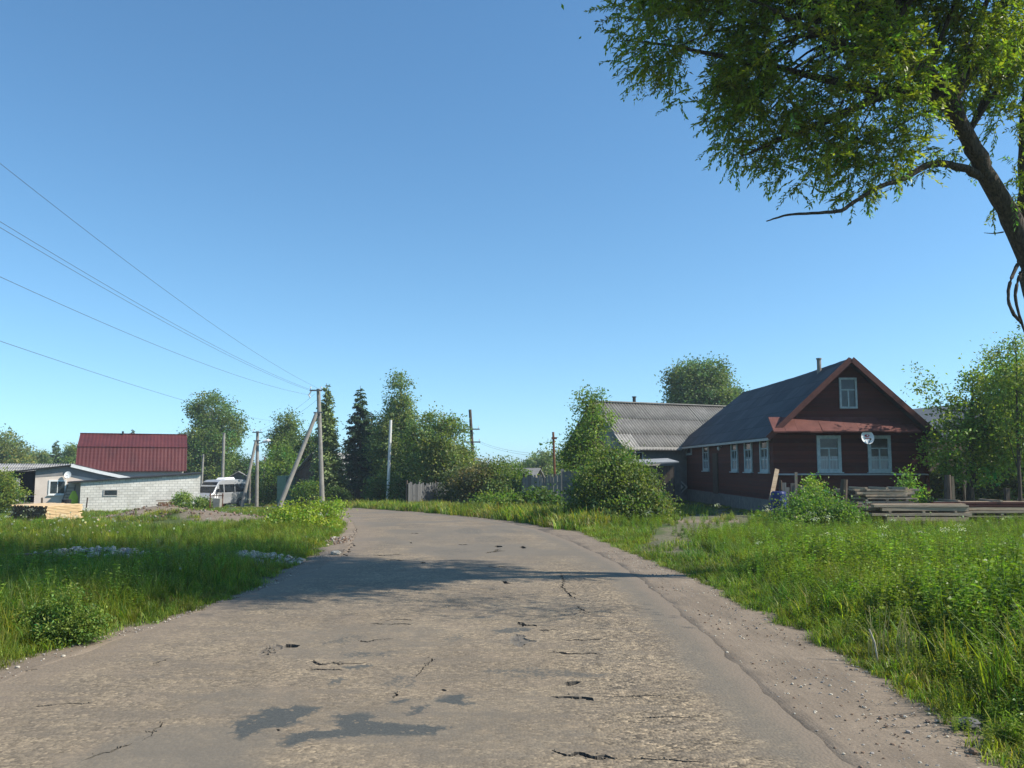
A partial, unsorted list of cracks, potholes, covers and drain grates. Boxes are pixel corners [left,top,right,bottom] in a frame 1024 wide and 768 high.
crack [306,660,367,671]
crack [392,656,435,698]
crack [560,574,589,613]
crack [550,693,664,701]
crack [517,622,600,655]
crack [82,721,163,761]
crack [552,749,698,762]
